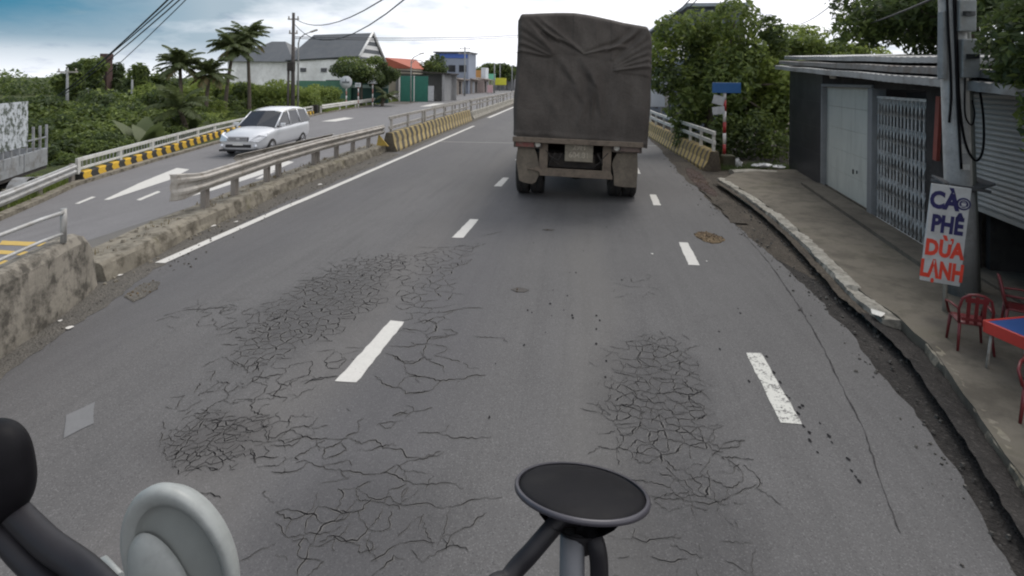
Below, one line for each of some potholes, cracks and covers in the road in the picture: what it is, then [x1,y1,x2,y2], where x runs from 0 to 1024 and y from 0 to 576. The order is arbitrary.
crack [155,231,507,576]
crack [580,330,781,576]
